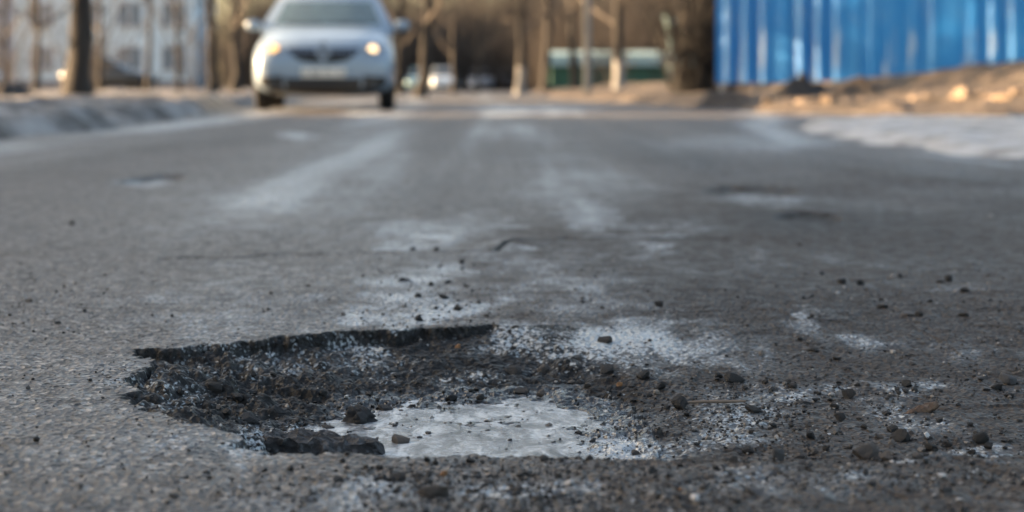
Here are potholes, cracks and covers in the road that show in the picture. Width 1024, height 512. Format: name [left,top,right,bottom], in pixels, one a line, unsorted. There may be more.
pothole [700,185,805,200]
pothole [120,324,772,462]
pothole [108,172,195,188]
pothole [770,210,848,224]
